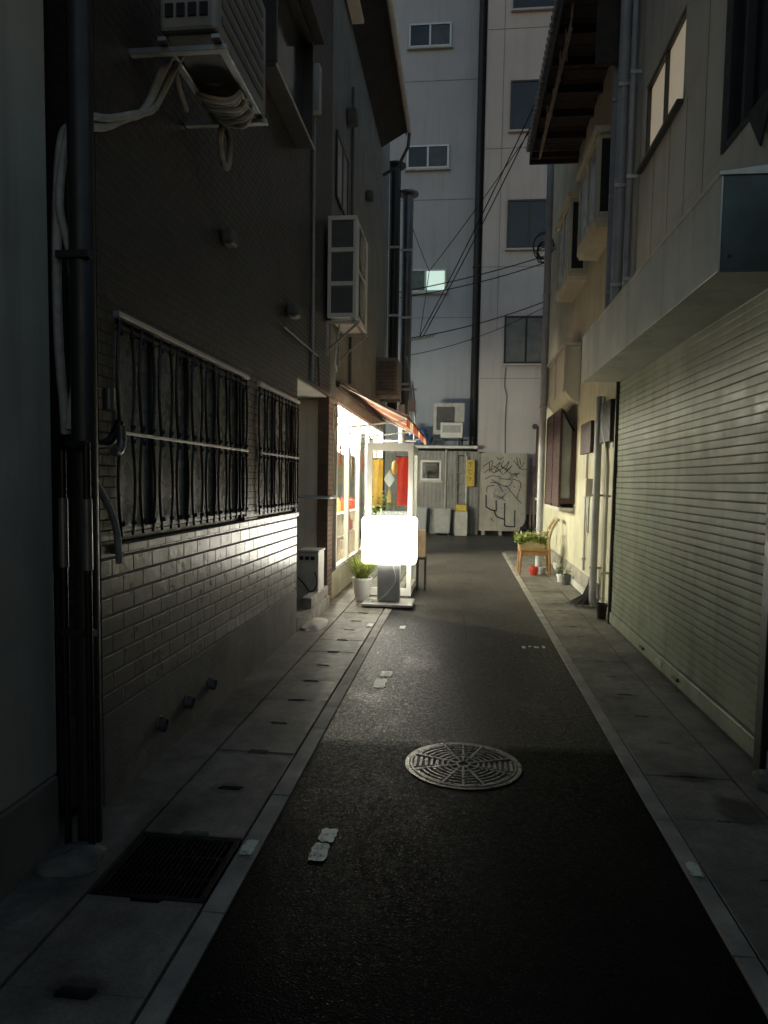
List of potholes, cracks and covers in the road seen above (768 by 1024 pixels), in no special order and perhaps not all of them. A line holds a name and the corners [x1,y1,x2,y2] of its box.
drain grate [90,832,242,908]
manhole cover [405,742,522,790]
